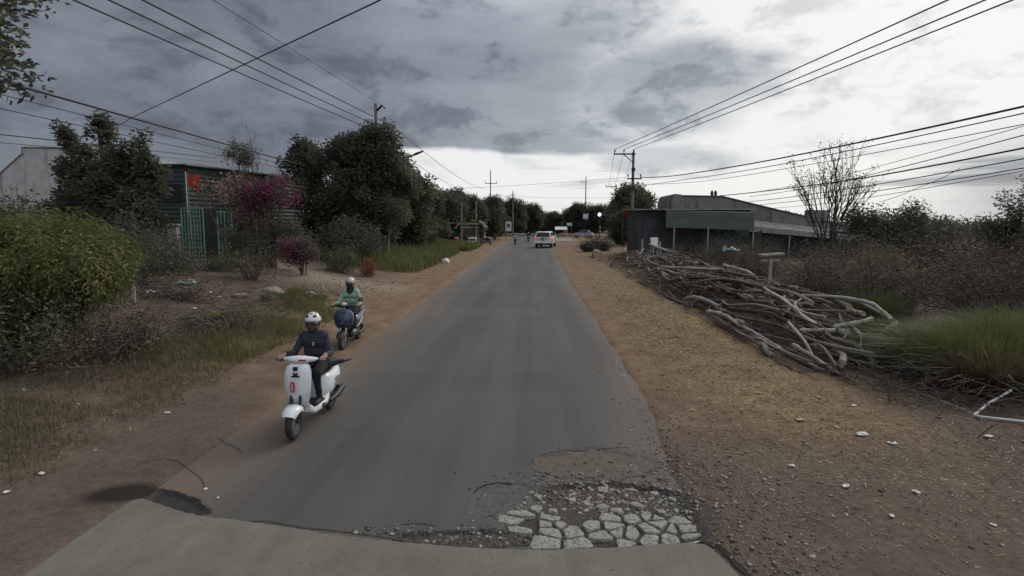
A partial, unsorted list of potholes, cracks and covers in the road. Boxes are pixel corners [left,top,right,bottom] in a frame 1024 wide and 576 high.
pothole [498,482,720,550]
crack [474,482,513,493]
